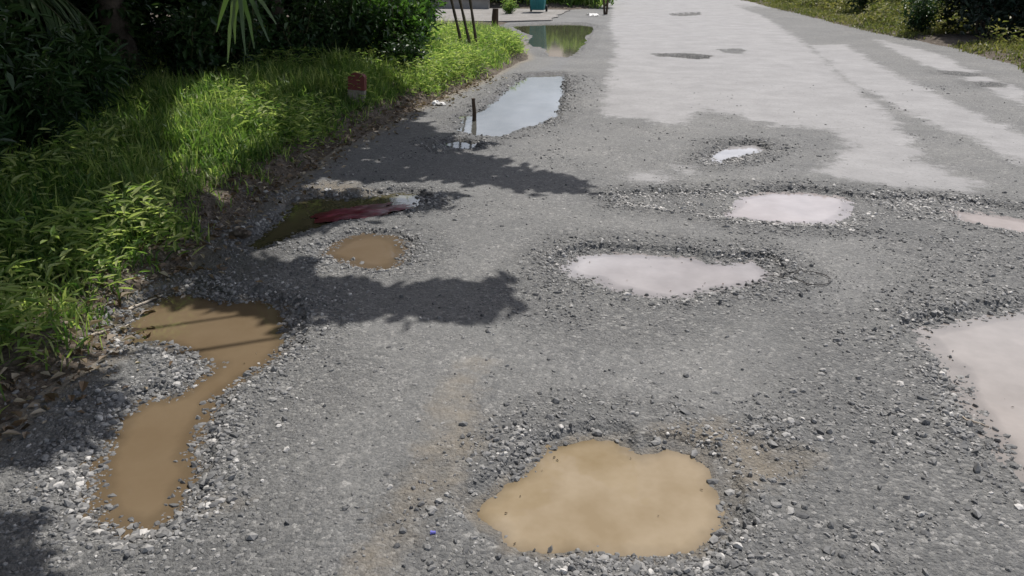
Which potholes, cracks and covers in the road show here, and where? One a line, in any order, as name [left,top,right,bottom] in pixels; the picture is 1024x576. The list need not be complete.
pothole [306,227,422,272]
pothole [543,241,795,302]
pothole [227,186,433,251]
pothole [506,22,599,57]
pothole [892,294,1024,489]
pothole [430,71,575,150]
pothole [440,417,769,576]
pothole [607,184,1024,234]
pothole [696,139,774,167]
pothole [55,278,316,550]
